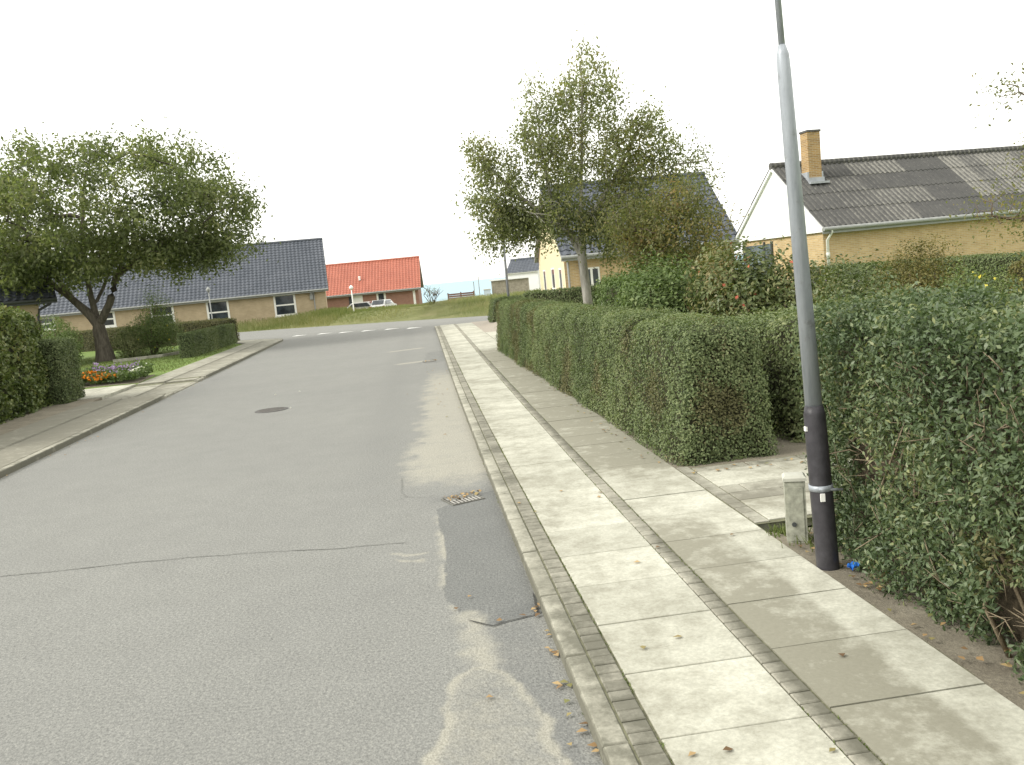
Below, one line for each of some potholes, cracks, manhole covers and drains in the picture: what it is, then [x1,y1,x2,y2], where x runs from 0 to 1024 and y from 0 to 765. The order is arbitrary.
drain grate [441,489,485,506]
